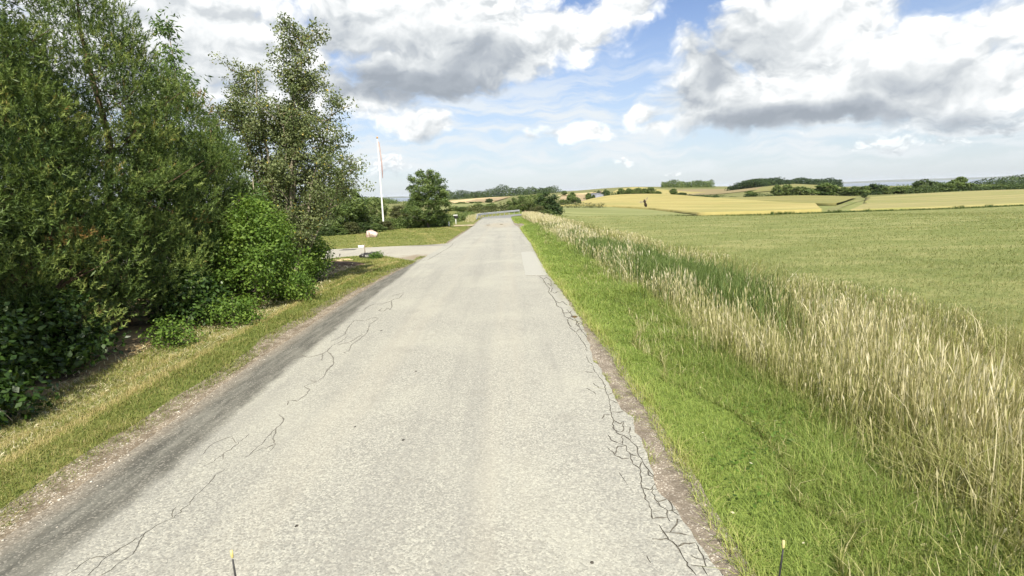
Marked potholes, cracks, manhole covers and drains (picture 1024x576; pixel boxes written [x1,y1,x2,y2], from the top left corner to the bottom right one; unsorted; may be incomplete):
crack [68,293,402,575]
crack [539,276,723,575]
